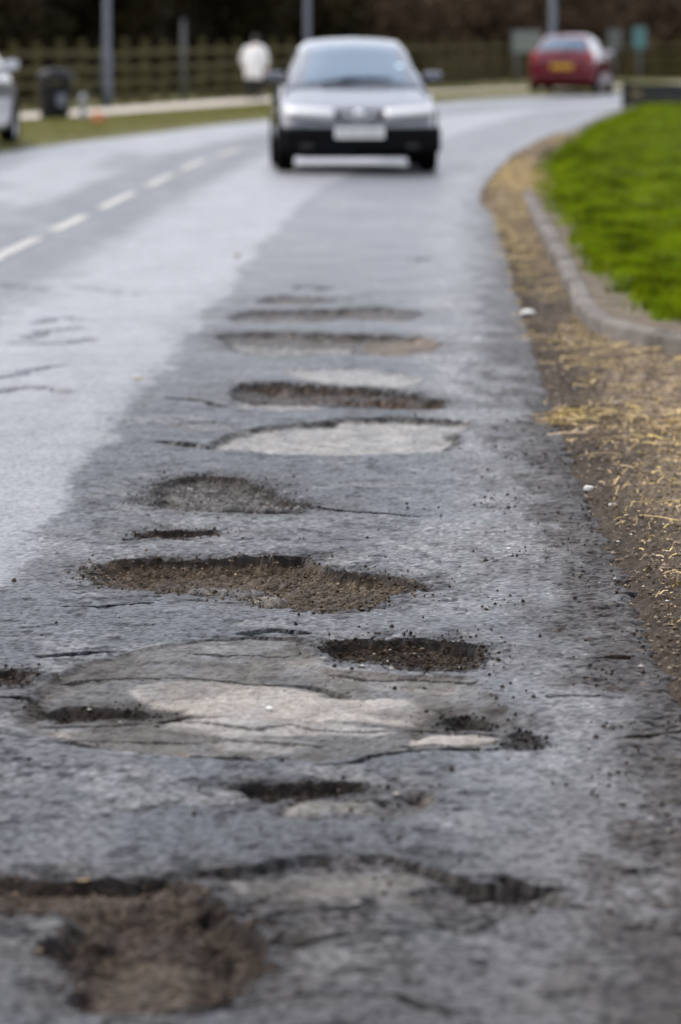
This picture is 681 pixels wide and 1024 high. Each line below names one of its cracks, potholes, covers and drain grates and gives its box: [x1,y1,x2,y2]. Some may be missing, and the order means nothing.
pothole [132,528,223,540]
crack [0,628,498,766]
pothole [225,305,426,323]
pothole [83,555,432,613]
pothole [0,876,278,1015]
pothole [131,474,319,513]
pothole [209,330,447,357]
pothole [184,852,574,949]
pothole [224,780,378,803]
pothole [500,730,560,751]
pothole [12,635,522,762]
pothole [225,380,452,410]
